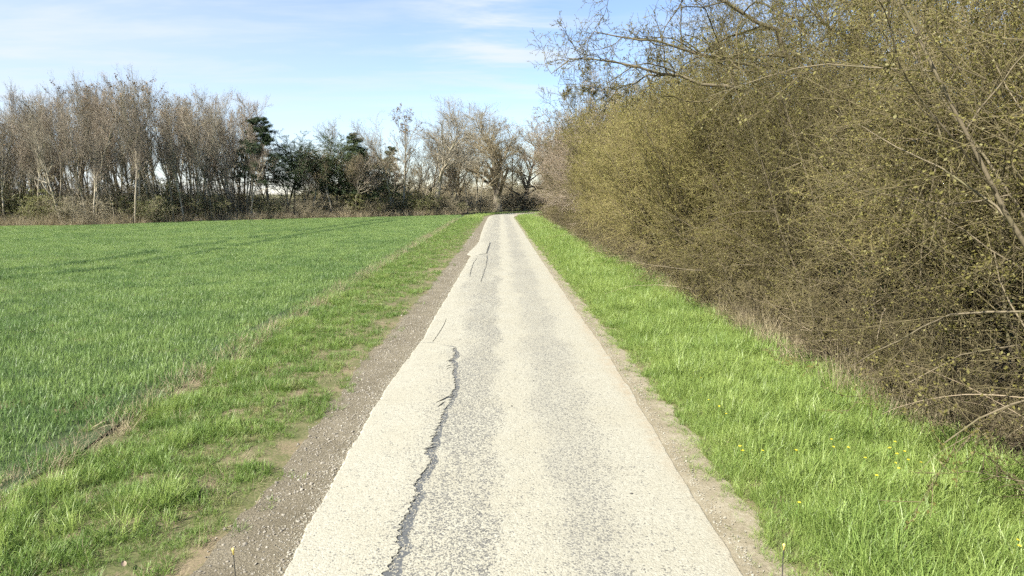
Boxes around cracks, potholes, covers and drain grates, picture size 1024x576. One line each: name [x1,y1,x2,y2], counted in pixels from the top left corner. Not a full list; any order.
crack [382,321,460,576]
